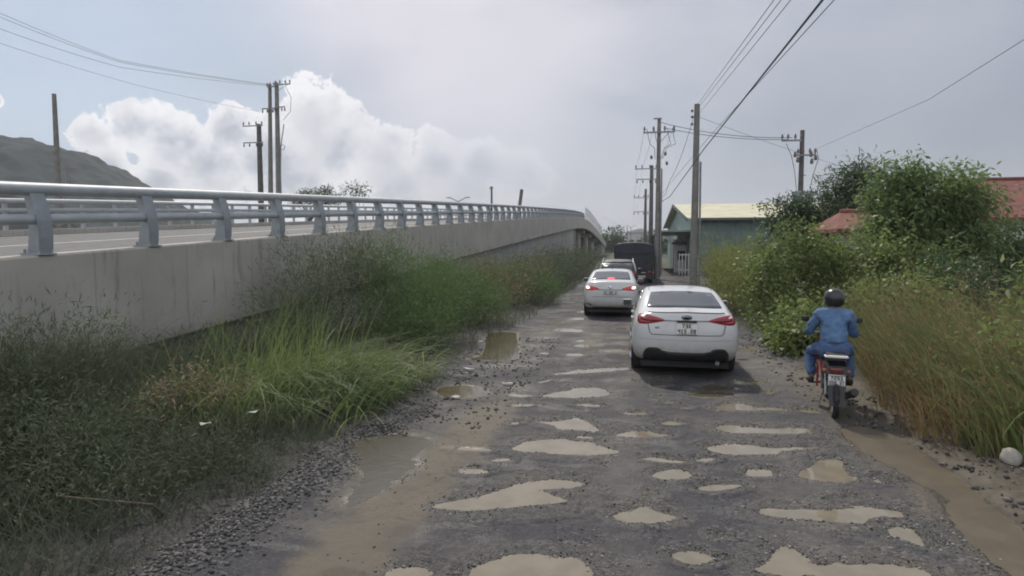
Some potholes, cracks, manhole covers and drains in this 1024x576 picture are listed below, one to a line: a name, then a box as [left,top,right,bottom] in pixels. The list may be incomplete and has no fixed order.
pothole [401,468,616,523]
pothole [697,419,833,439]
pothole [782,450,878,487]
pothole [595,497,698,529]
pothole [658,539,731,569]
pothole [638,462,708,483]
pothole [368,554,453,576]
pothole [530,383,630,401]
pothole [731,496,935,533]
pothole [726,529,971,576]
pothole [688,436,841,461]
pothole [605,425,683,440]
